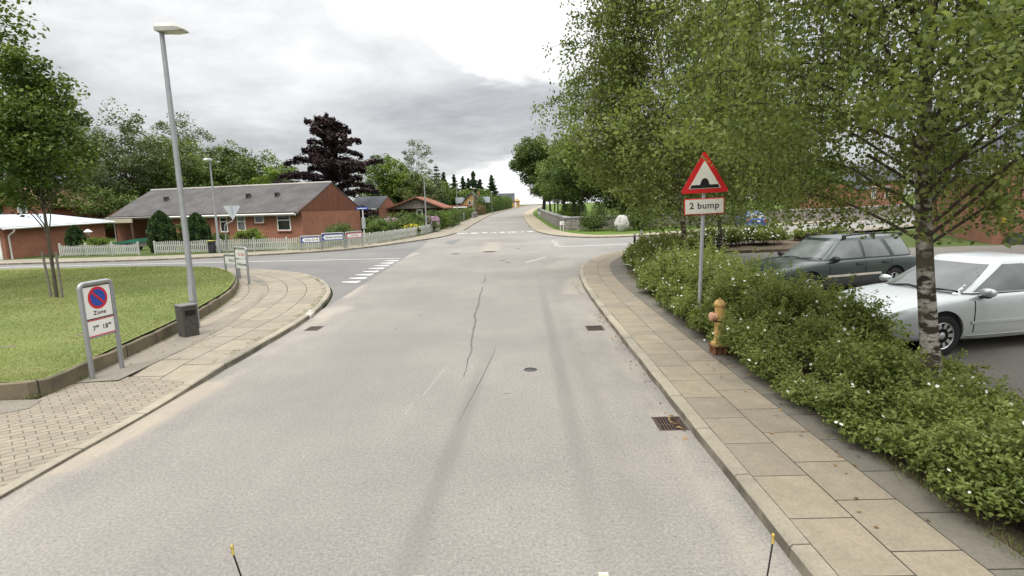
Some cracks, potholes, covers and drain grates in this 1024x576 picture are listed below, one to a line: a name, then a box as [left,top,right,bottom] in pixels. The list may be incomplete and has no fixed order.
drain grate [651,416,689,431]
crack [460,278,496,419]
